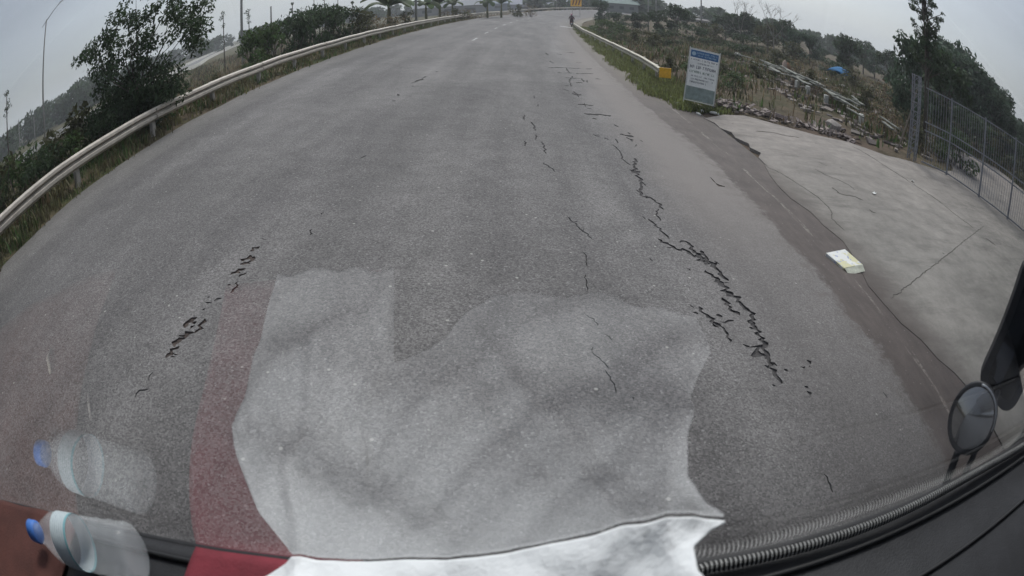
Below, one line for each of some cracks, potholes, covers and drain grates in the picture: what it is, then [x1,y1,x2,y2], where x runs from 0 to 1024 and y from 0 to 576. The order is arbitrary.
crack [585,314,634,400]
crack [545,52,783,384]
crack [765,162,875,229]
crack [135,238,266,398]
crack [523,96,555,172]
